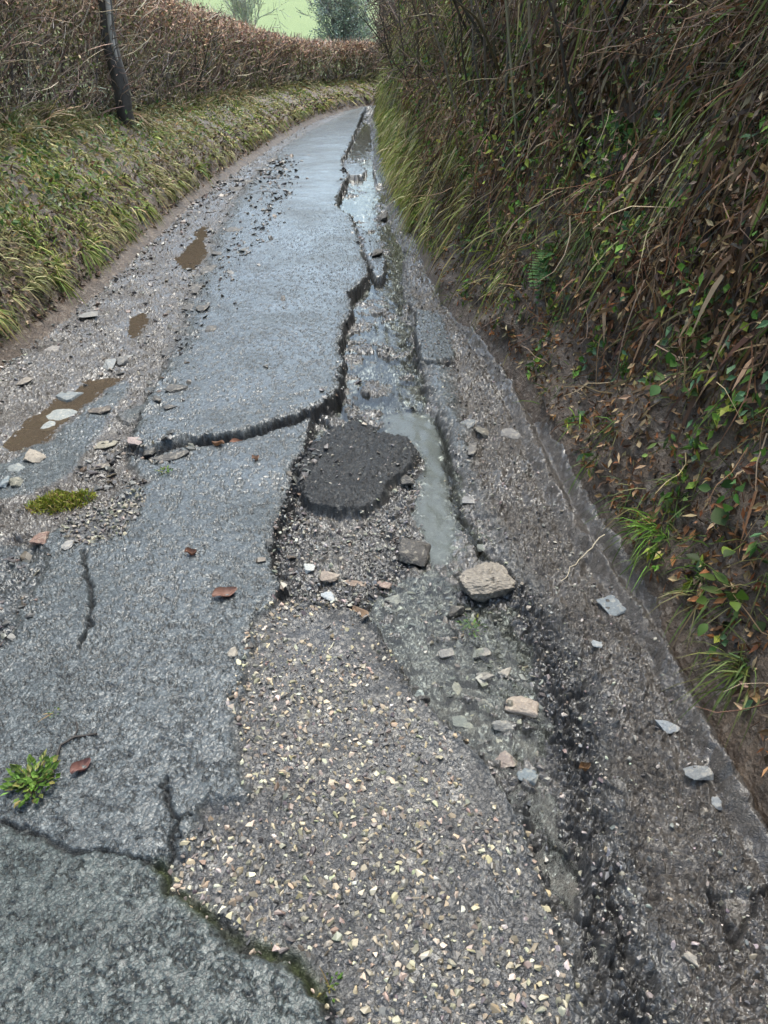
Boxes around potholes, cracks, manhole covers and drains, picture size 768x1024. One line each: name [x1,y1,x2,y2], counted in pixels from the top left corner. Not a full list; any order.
crack [142,409,312,460]
crack [361,252,381,300]
pothole [267,425,426,610]
crack [77,548,96,649]
crack [153,774,337,1024]
